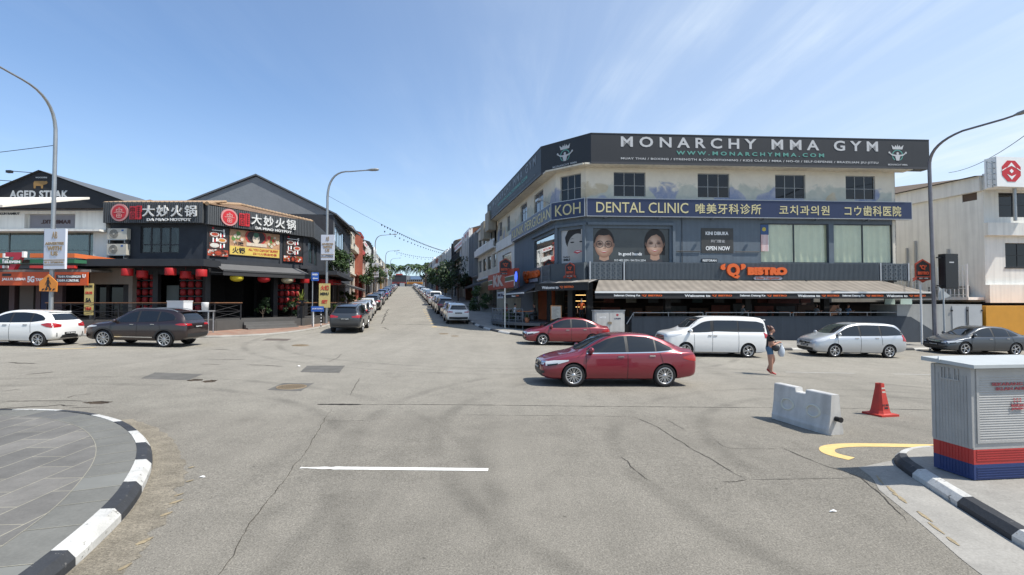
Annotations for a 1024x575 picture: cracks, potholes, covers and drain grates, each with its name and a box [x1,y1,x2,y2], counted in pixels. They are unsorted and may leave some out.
crack [219,380,919,574]
